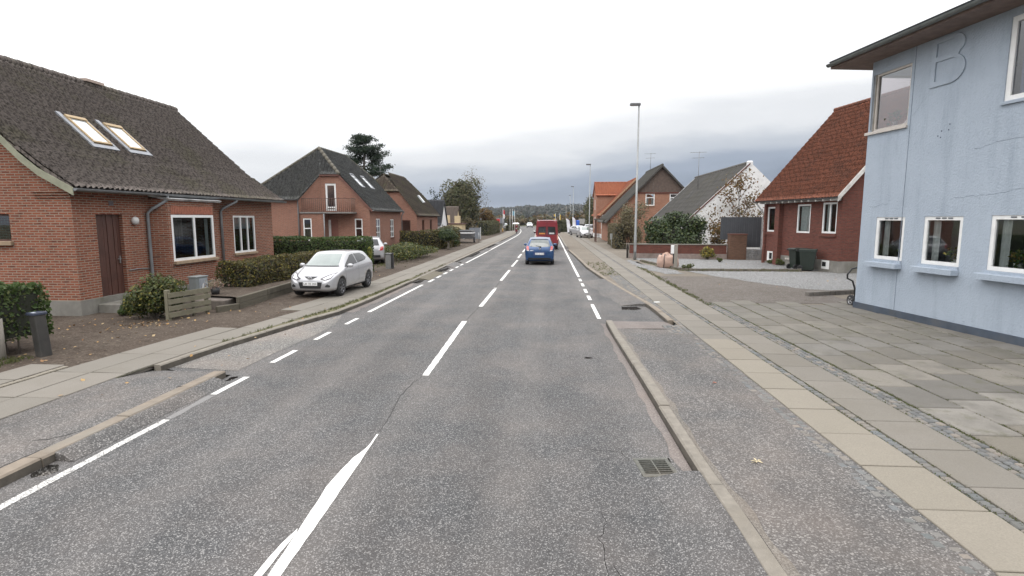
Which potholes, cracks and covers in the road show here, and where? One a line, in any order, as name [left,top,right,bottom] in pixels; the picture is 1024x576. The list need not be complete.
crack [0,431,79,468]
crack [597,519,621,576]
